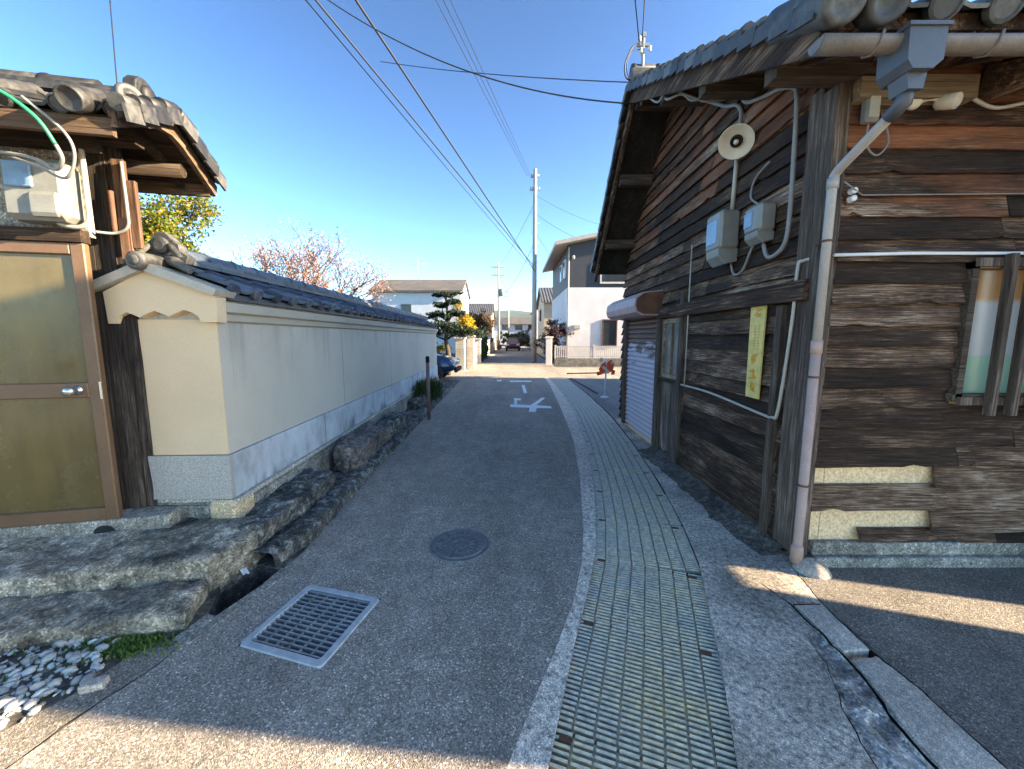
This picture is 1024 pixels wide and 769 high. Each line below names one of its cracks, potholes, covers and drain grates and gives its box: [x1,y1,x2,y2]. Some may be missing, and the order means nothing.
drain grate [240,585,380,670]
manhole cover [429,529,490,562]
